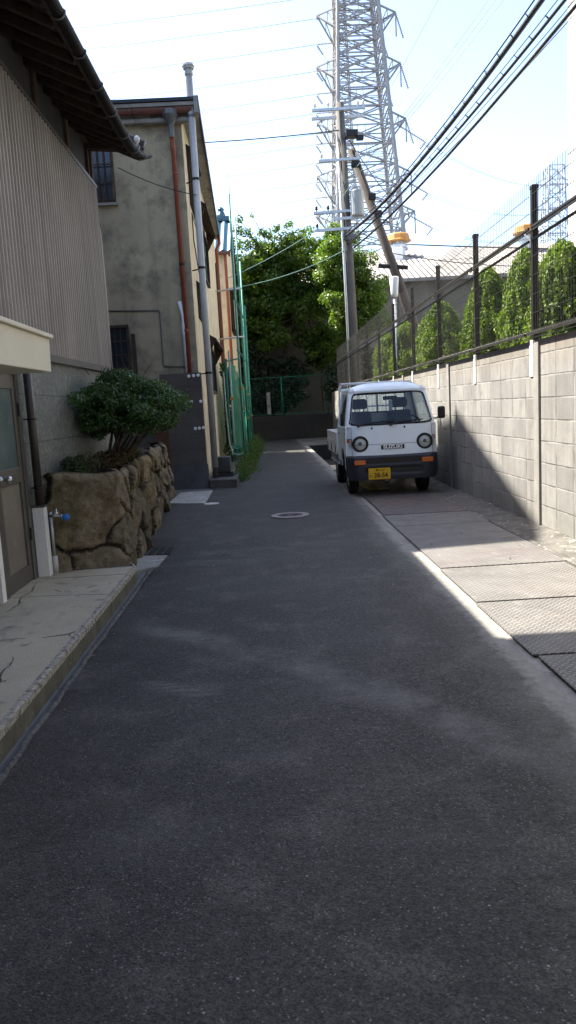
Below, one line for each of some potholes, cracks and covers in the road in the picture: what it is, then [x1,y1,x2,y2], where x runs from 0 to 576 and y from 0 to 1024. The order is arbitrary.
drain grate [145,546,177,556]
